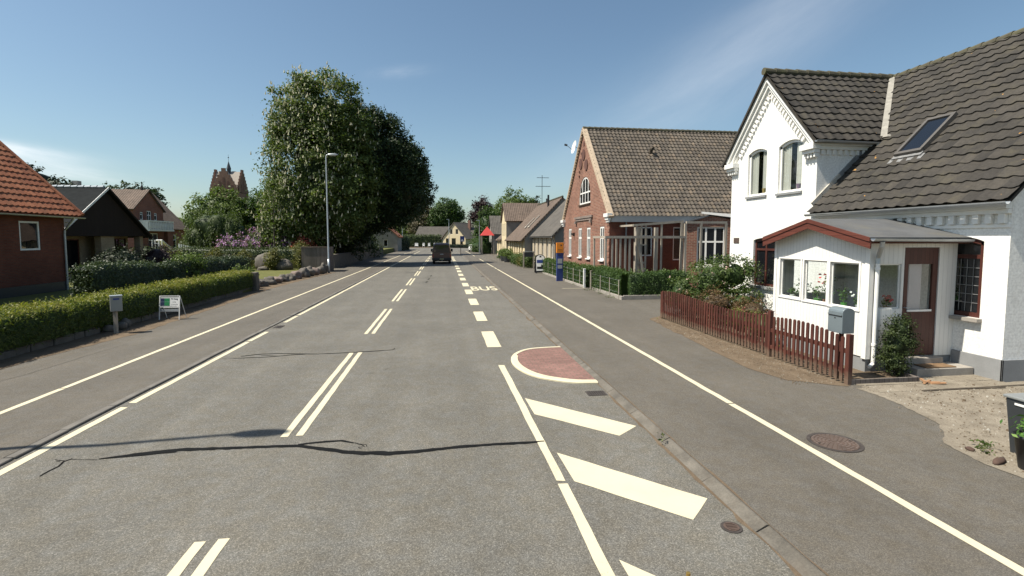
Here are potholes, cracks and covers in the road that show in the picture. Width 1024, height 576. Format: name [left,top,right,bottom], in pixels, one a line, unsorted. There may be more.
crack [40,458,96,476]
crack [246,348,395,374]
manhole cover [806,433,865,453]
manhole cover [720,521,743,534]
